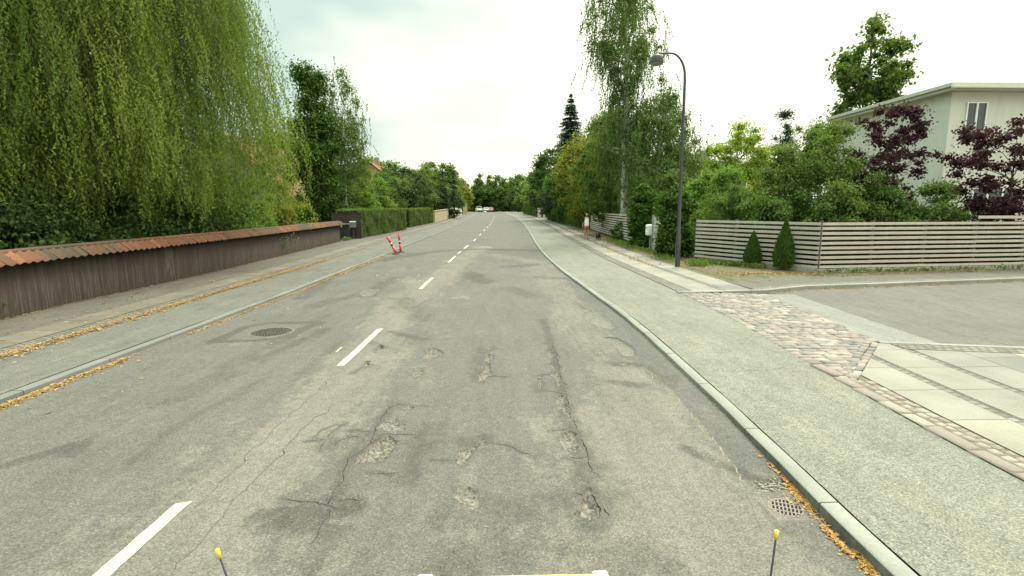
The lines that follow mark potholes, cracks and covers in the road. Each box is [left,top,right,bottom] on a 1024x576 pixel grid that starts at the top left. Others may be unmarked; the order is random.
crack [282,404,427,542]
pothole [423,348,443,361]
pothole [379,418,407,431]
pothole [573,487,600,520]
pothole [454,486,482,510]
pothole [454,439,488,465]
drain grate [751,494,821,520]
manhole cover [247,327,295,337]
pothole [478,354,495,382]
pothole [558,430,579,452]
pothole [353,436,398,465]
crack [542,346,599,476]
